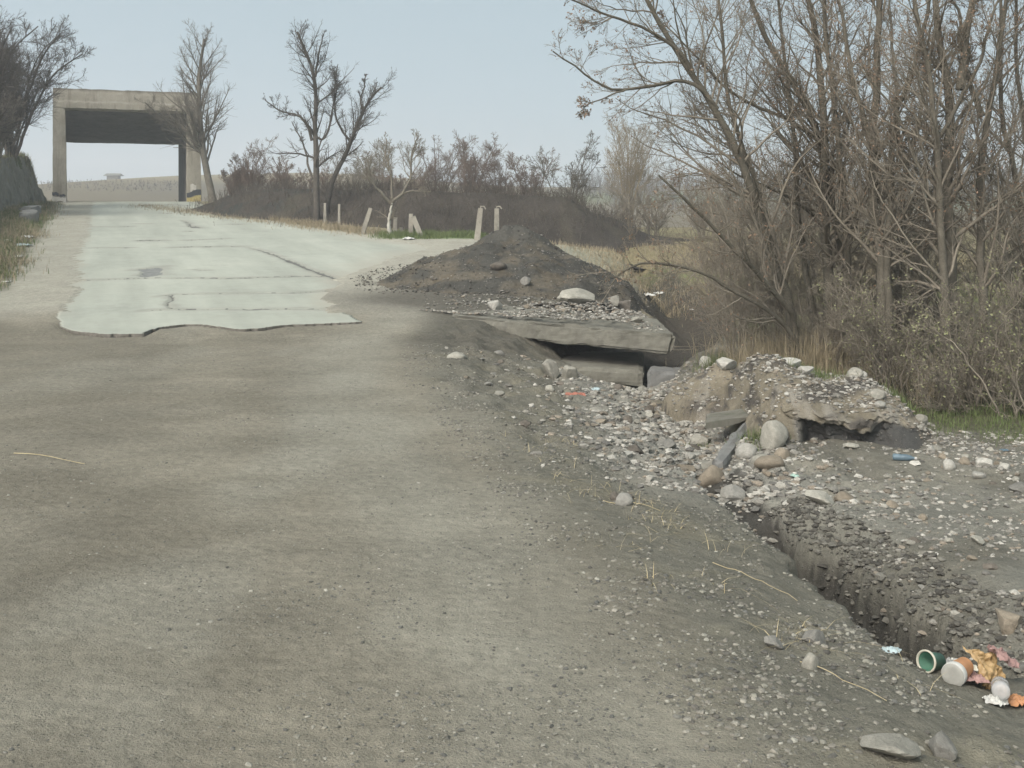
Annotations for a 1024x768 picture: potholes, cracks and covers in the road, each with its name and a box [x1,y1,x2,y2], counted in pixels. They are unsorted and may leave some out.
crack [87,249,335,311]
